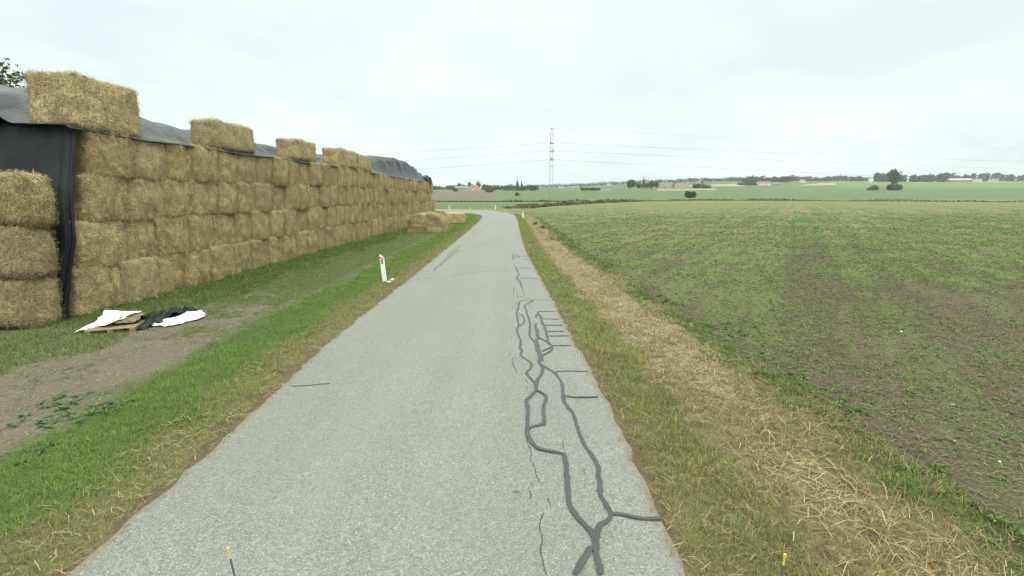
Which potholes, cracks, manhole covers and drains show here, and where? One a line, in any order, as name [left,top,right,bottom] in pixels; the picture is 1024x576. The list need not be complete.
crack [525,426,585,575]
